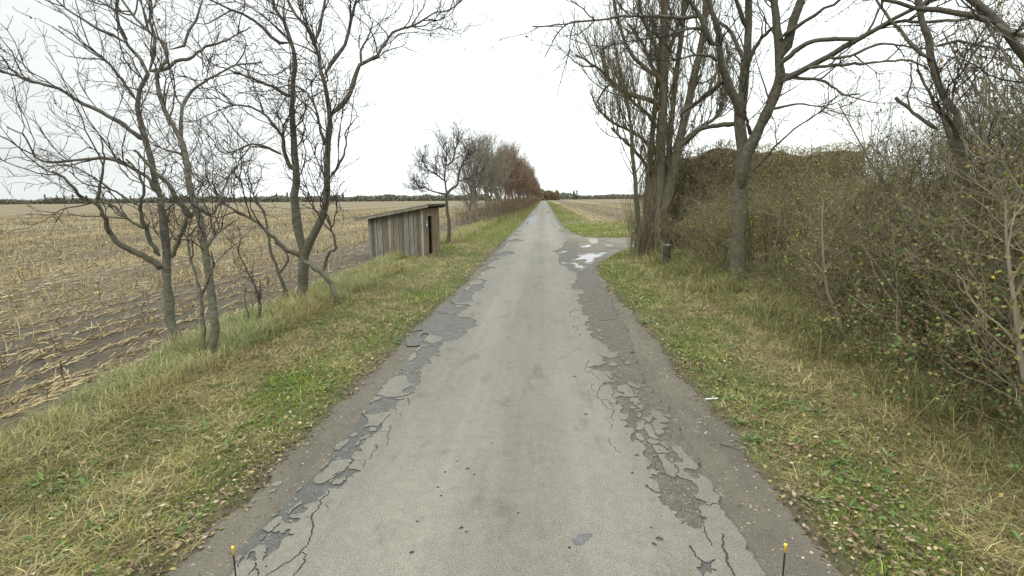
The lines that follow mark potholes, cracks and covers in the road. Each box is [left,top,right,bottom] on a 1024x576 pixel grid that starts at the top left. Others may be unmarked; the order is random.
crack [702,524,735,576]
crack [363,397,410,467]
crack [586,355,621,452]
crack [237,471,340,576]
